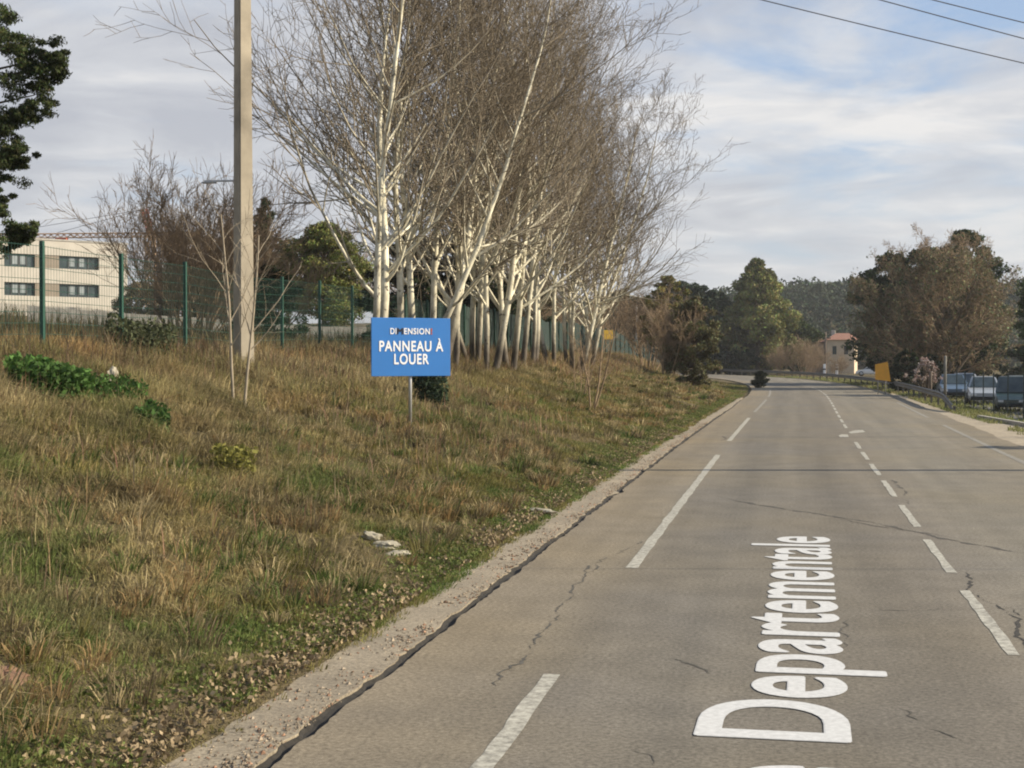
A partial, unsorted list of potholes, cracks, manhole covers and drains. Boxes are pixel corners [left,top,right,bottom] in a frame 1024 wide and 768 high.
crack [492,541,643,685]
crack [721,497,1024,553]
crack [966,573,1024,644]
